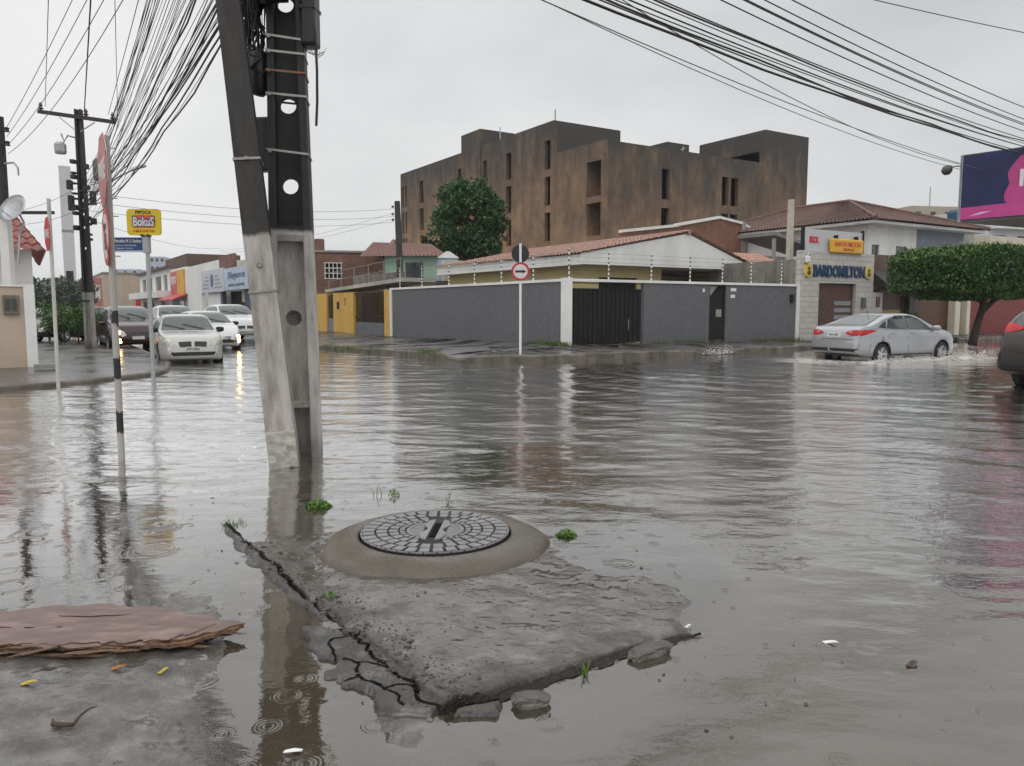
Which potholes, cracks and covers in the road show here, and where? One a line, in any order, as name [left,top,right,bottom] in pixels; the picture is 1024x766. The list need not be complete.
crack [118,523,701,716]
manhole cover [360,510,509,556]
